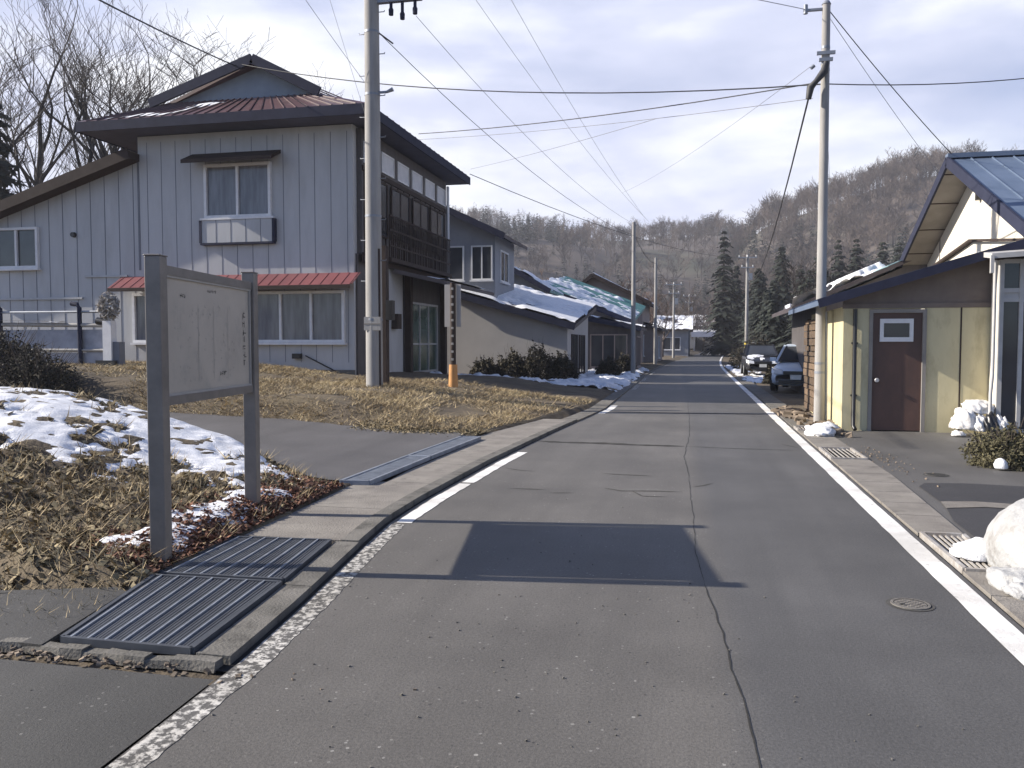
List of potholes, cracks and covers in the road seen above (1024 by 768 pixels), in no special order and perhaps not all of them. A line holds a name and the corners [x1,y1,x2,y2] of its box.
crack [543,411,797,768]
drain grate [919,531,992,575]
drain grate [818,447,868,461]
drain grate [60,574,282,655]
manhole cover [886,597,935,611]
drain grate [408,436,481,460]
drain grate [339,455,431,485]
drain grate [158,536,332,585]
